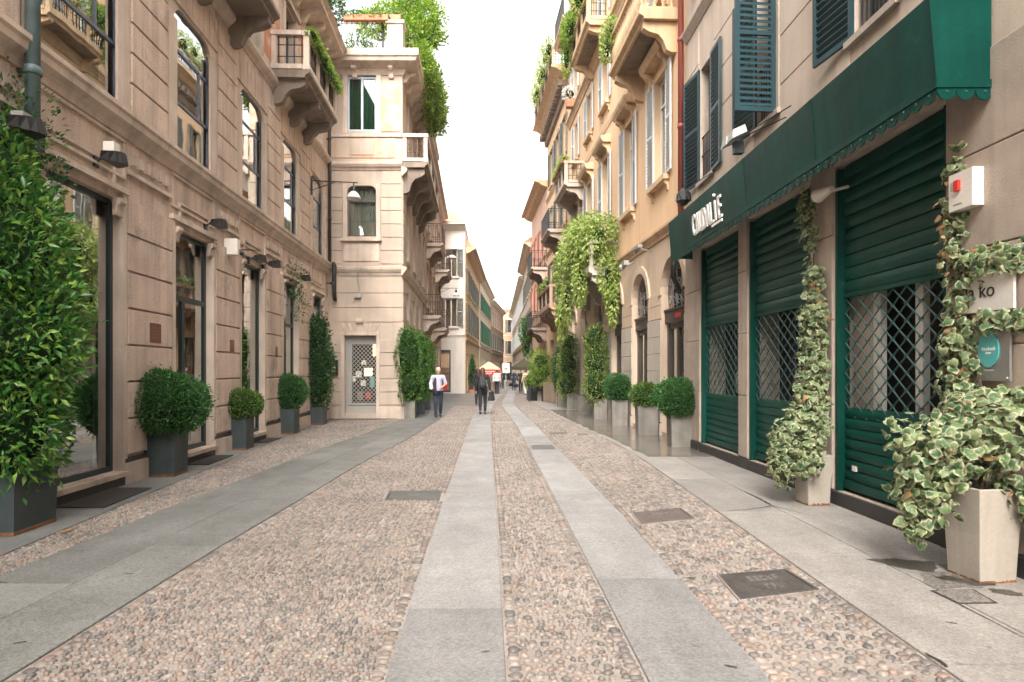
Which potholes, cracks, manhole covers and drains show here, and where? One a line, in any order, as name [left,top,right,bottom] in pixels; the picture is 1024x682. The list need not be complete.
manhole cover [631,508,696,525]
manhole cover [385,490,441,501]
manhole cover [717,569,821,602]
